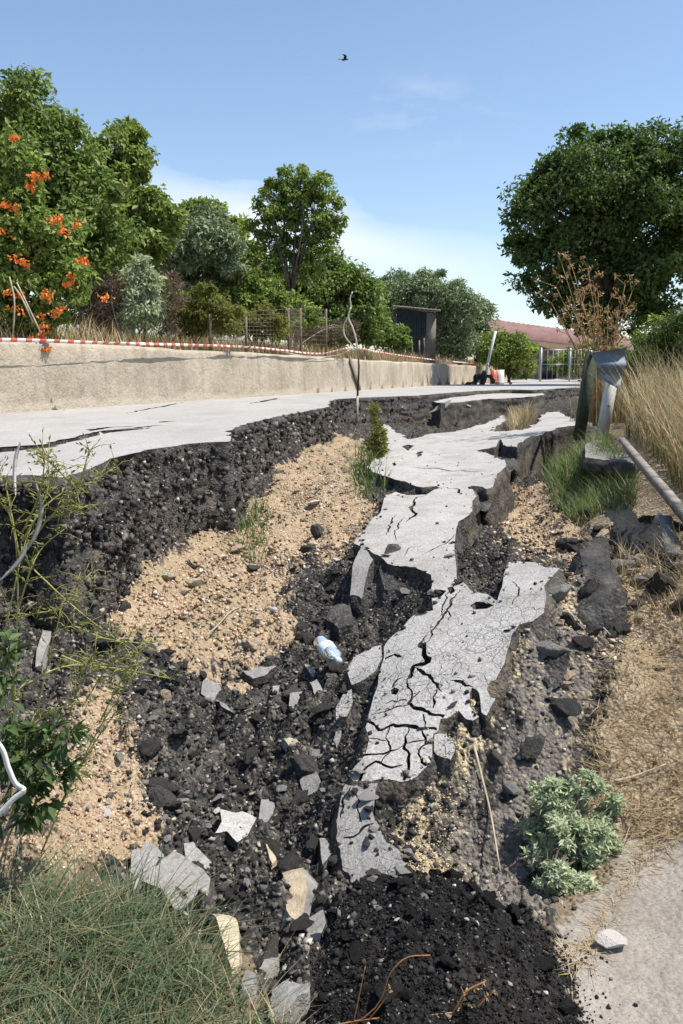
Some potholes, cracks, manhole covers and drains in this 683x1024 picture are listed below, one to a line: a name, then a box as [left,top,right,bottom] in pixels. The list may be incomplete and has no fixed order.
pothole [479,496,495,512]
crack [0,404,174,452]
pothole [497,452,519,473]
crack [370,484,418,553]
crack [340,584,471,838]
